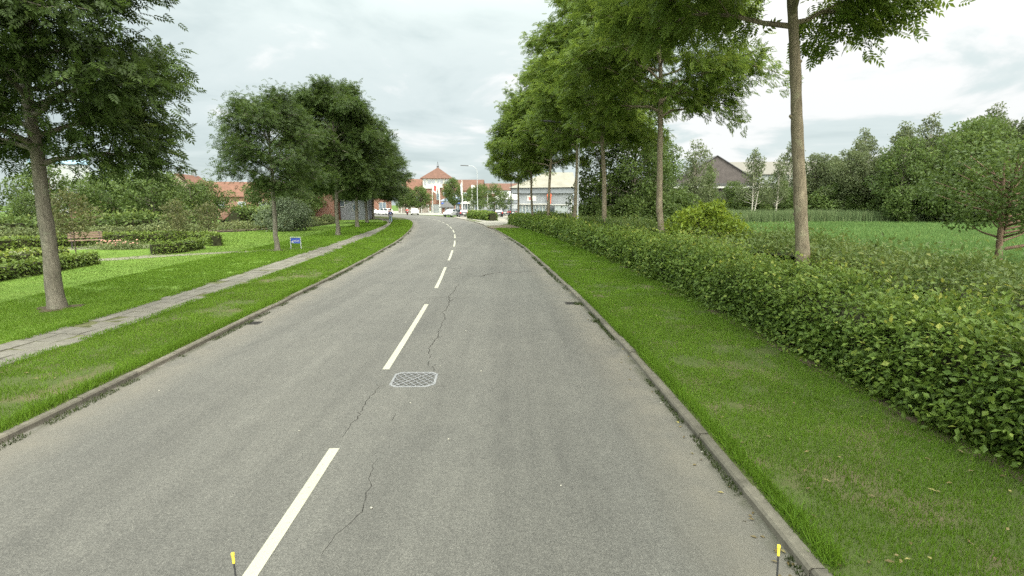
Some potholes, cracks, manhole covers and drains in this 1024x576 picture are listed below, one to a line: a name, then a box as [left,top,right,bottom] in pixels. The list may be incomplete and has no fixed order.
crack [321,461,376,555]
crack [428,268,460,368]
